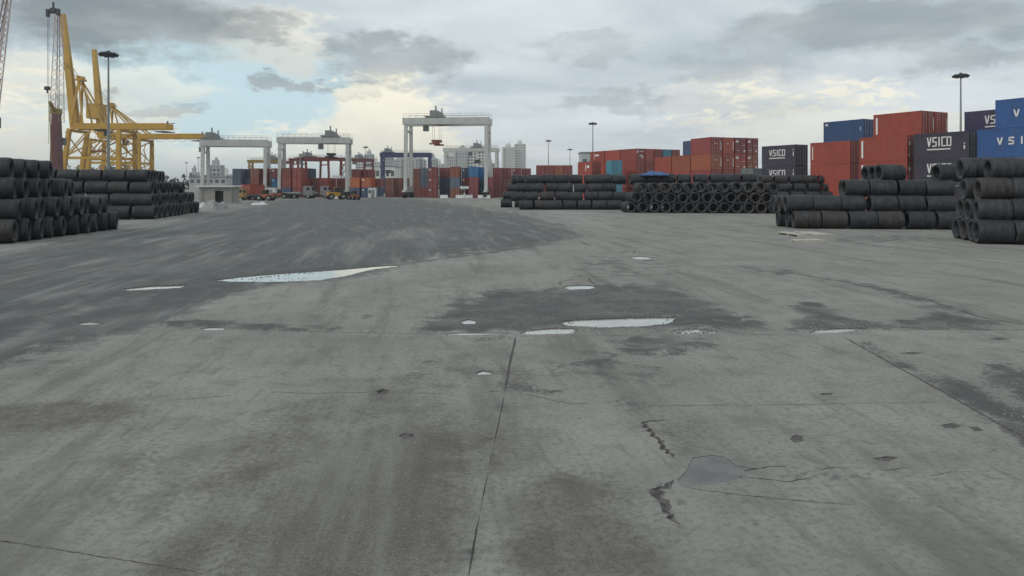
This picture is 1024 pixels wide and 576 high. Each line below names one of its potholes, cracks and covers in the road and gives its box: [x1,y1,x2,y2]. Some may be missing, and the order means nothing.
crack [616,419,675,458]
pothole [211,265,400,281]
crack [650,465,851,524]
